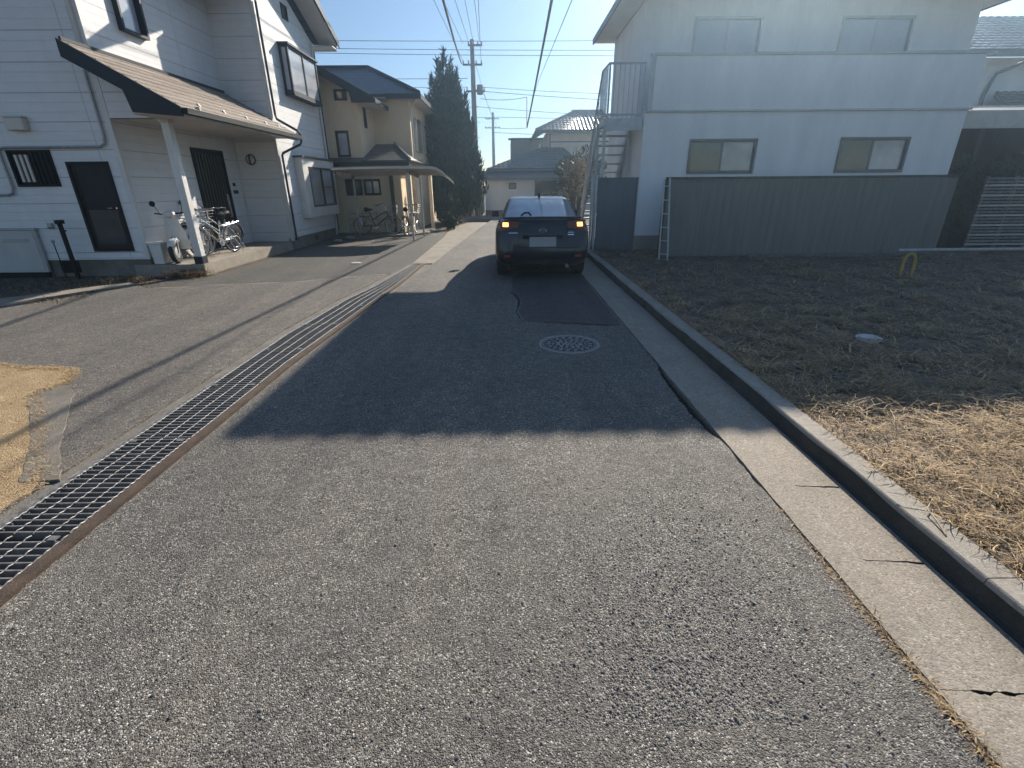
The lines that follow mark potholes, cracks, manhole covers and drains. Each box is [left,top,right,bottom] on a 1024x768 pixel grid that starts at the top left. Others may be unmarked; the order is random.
drain grate [0,438,190,540]
drain grate [134,383,258,439]
drain grate [336,291,384,306]
drain grate [266,323,340,349]
drain grate [0,535,68,589]
manhole cover [539,335,600,354]
drain grate [363,280,399,292]
drain grate [386,271,411,281]
drain grate [214,348,306,385]
crack [511,292,613,326]
drain grate [305,305,364,324]
